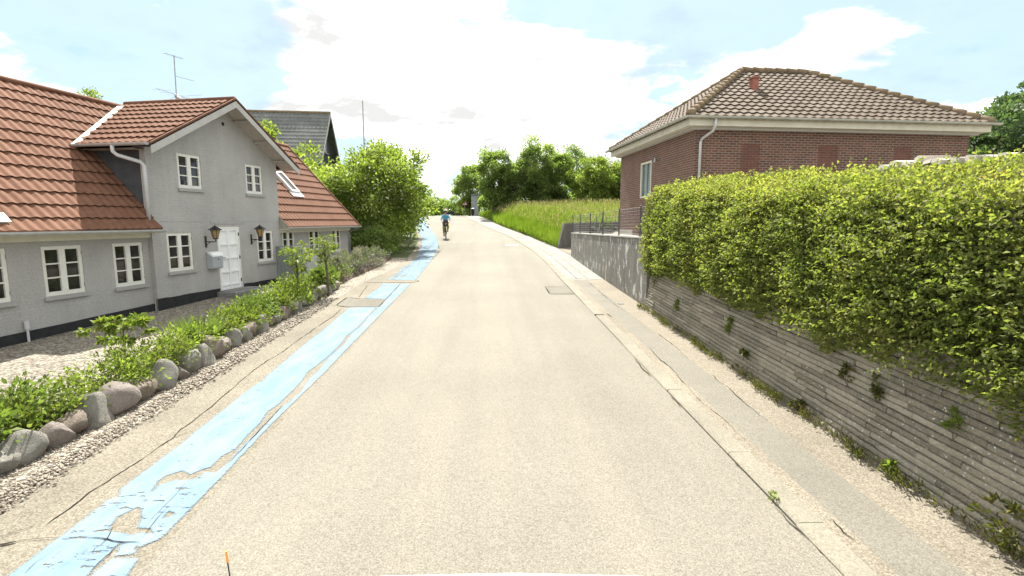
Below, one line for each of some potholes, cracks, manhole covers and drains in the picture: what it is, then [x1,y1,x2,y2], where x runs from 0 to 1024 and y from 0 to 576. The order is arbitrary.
crack [635,352,757,484]
